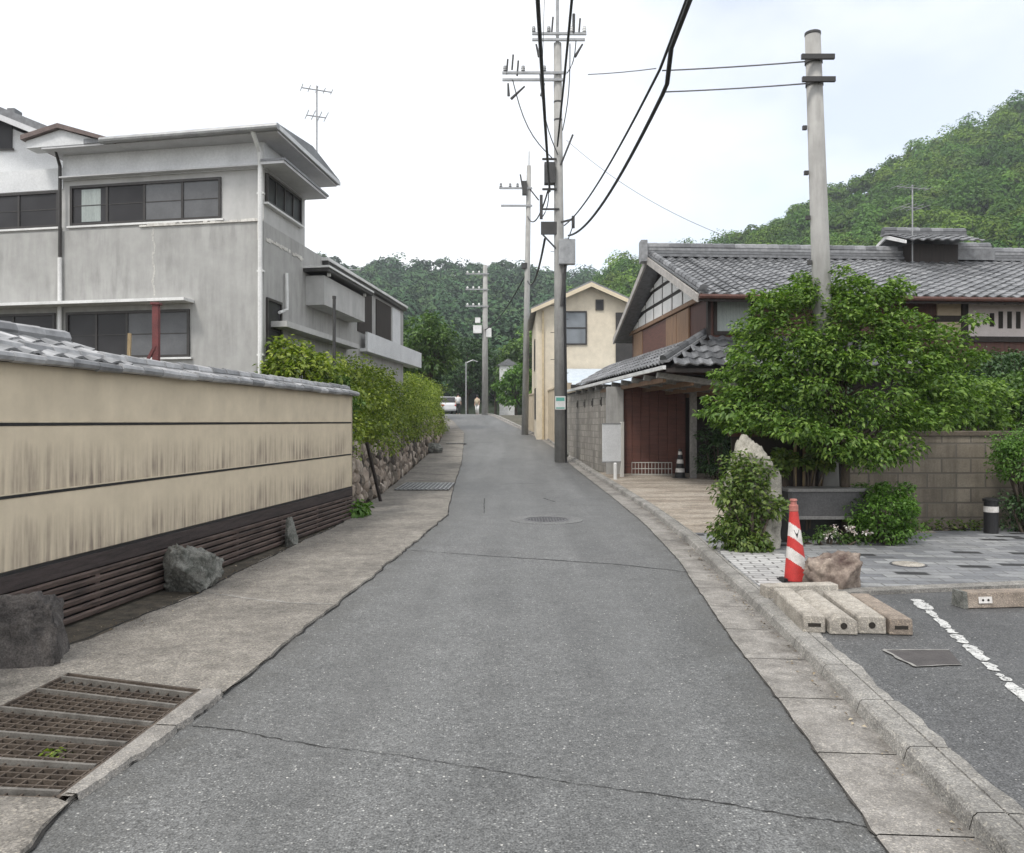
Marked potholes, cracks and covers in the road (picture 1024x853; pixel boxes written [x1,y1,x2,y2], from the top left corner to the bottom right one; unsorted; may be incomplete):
crack [191,725,866,827]
drain grate [0,673,201,801]
manhole cover [509,515,583,524]
drain grate [394,482,455,490]
